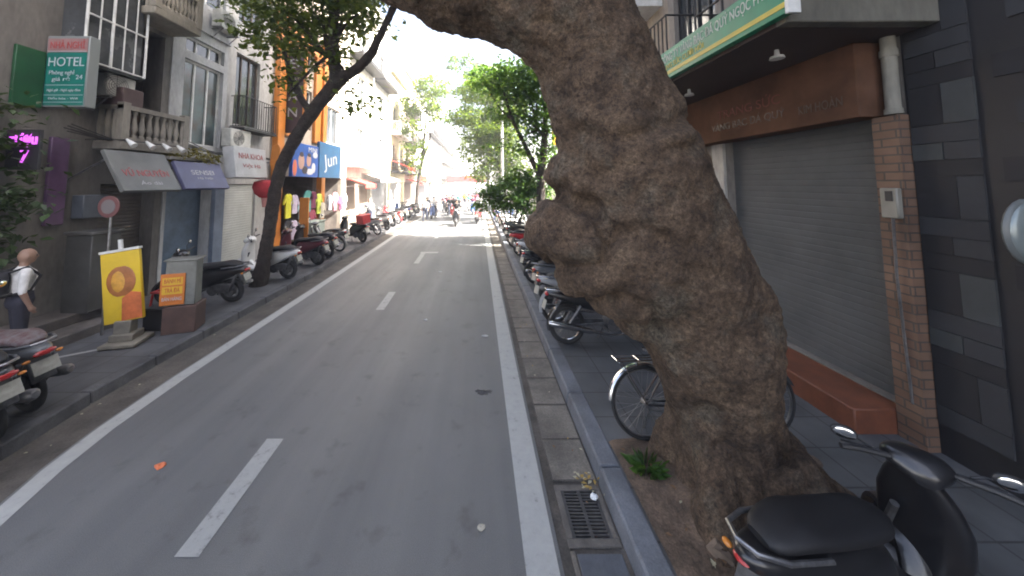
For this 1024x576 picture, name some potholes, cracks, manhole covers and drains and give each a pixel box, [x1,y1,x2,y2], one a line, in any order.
drain grate [554,485,622,549]
